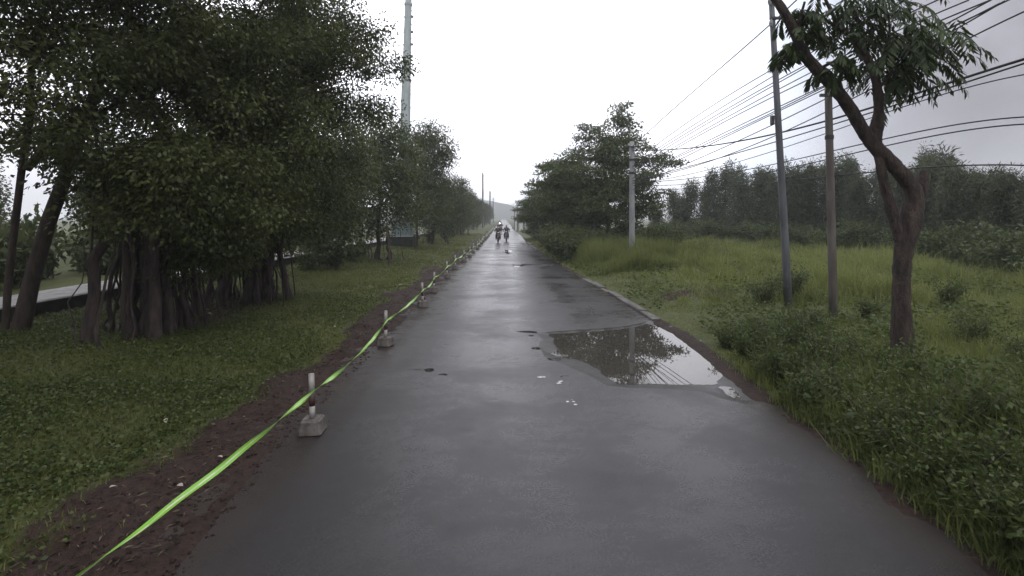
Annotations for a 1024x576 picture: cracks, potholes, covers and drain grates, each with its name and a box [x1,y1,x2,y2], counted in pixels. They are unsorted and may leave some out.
pothole [534,321,761,405]
